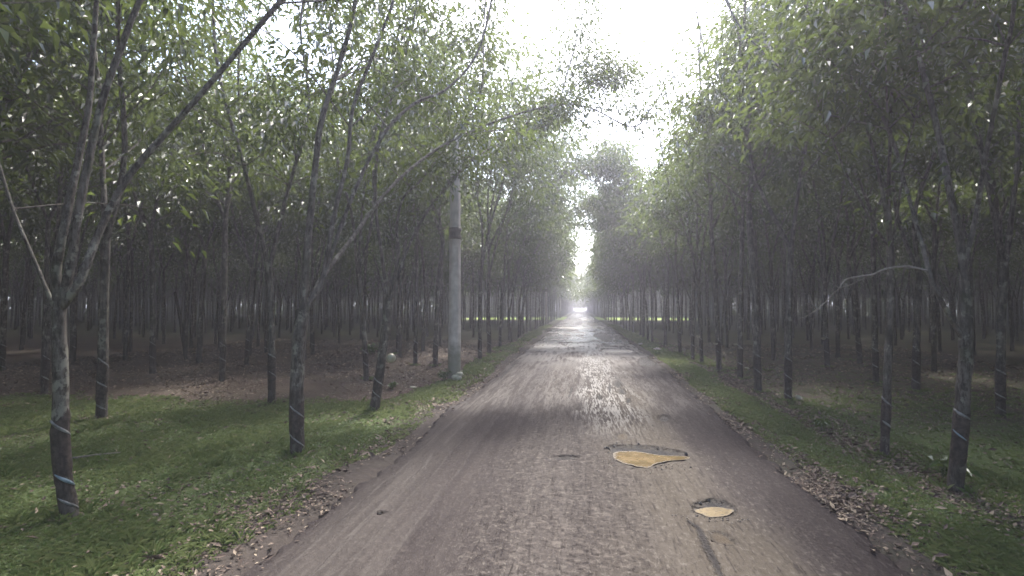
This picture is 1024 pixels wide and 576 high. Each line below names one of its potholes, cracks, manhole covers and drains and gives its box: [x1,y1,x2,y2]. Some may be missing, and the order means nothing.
pothole [594,442,715,474]
crack [687,520,724,576]
